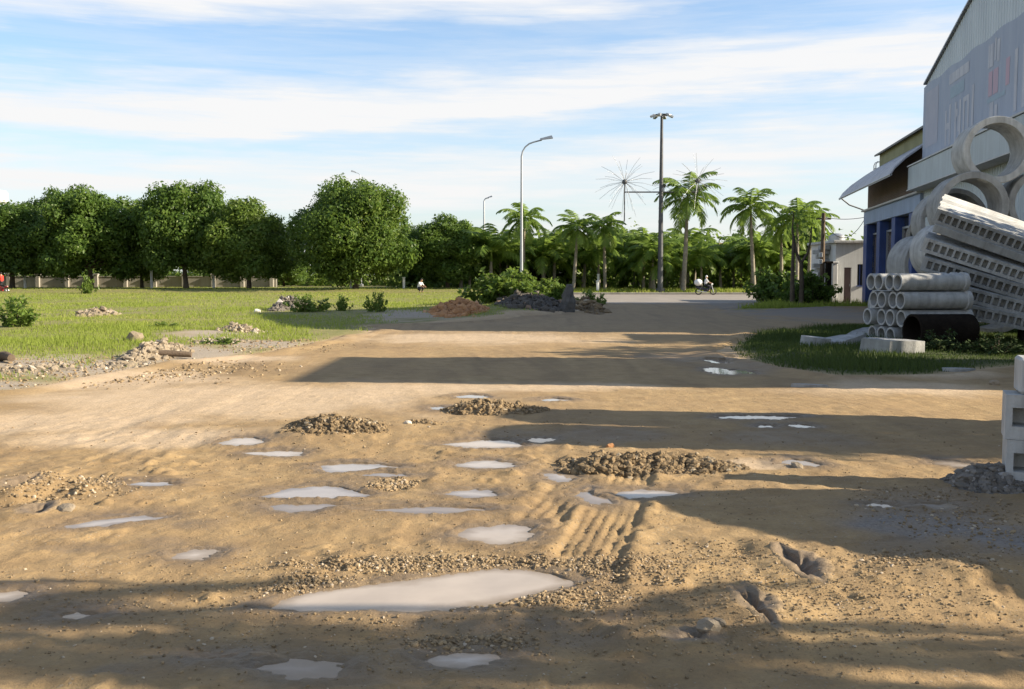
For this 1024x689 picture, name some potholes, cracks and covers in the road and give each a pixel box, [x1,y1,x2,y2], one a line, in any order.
pothole [305,458,416,474]
pothole [399,644,526,673]
pothole [50,512,179,530]
pothole [155,544,230,563]
pothole [223,651,371,684]
pothole [244,563,597,618]
pothole [443,520,547,548]
pothole [247,481,383,503]
pothole [726,581,786,633]
pothole [435,436,536,449]
pothole [768,541,835,584]
